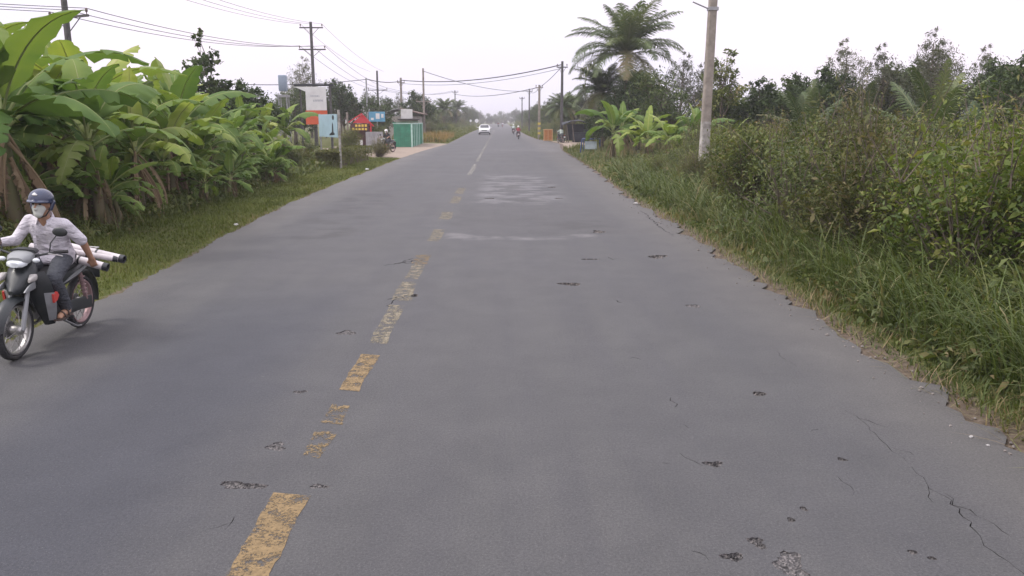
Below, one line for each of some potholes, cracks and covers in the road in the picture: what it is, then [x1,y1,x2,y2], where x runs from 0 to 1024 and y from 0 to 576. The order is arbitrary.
crack [845,410,1024,574]
pothole [265,442,286,451]
pothole [746,537,767,550]
pothole [719,552,743,562]
pothole [219,481,269,489]
pothole [772,550,810,576]
